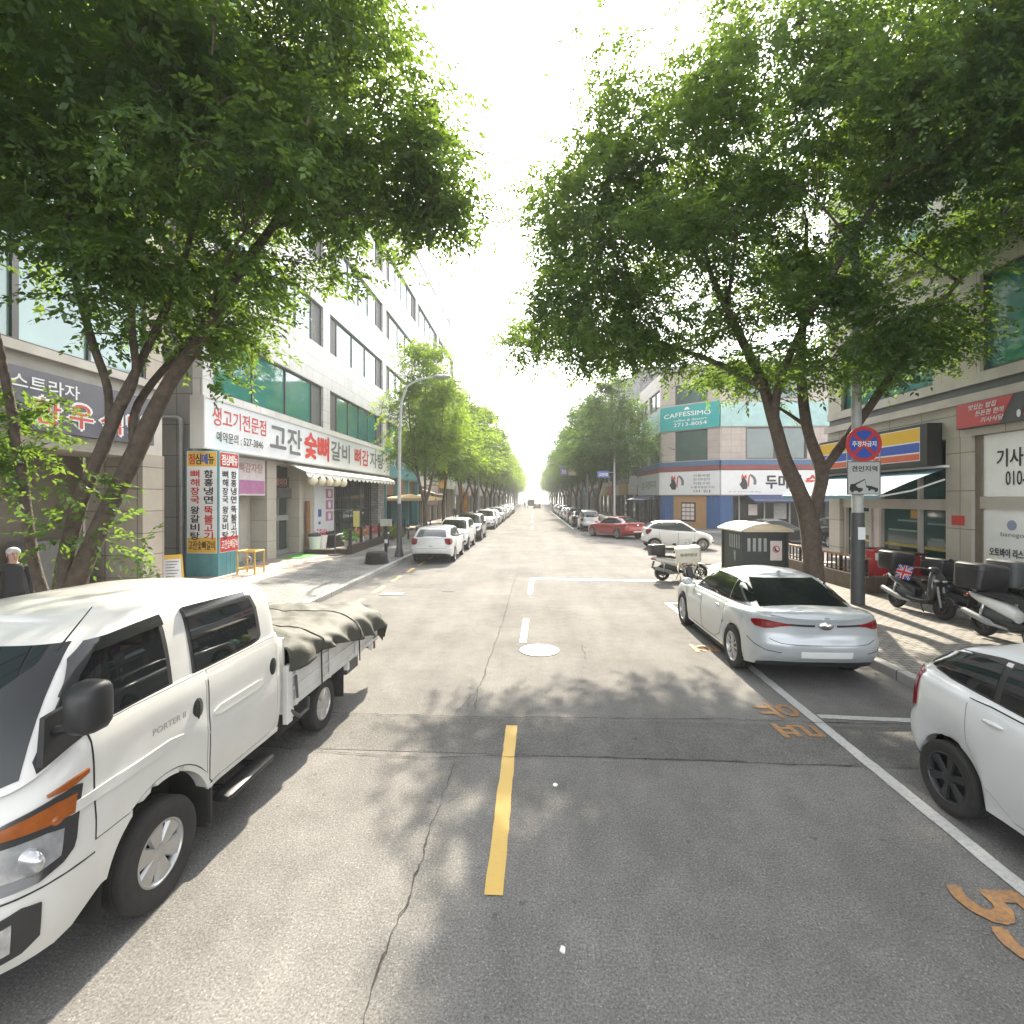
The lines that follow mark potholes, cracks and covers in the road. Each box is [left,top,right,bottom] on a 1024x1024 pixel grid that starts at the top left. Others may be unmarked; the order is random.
manhole cover [520,644,559,656]
crack [346,566,907,725]
crack [266,746,851,1024]
